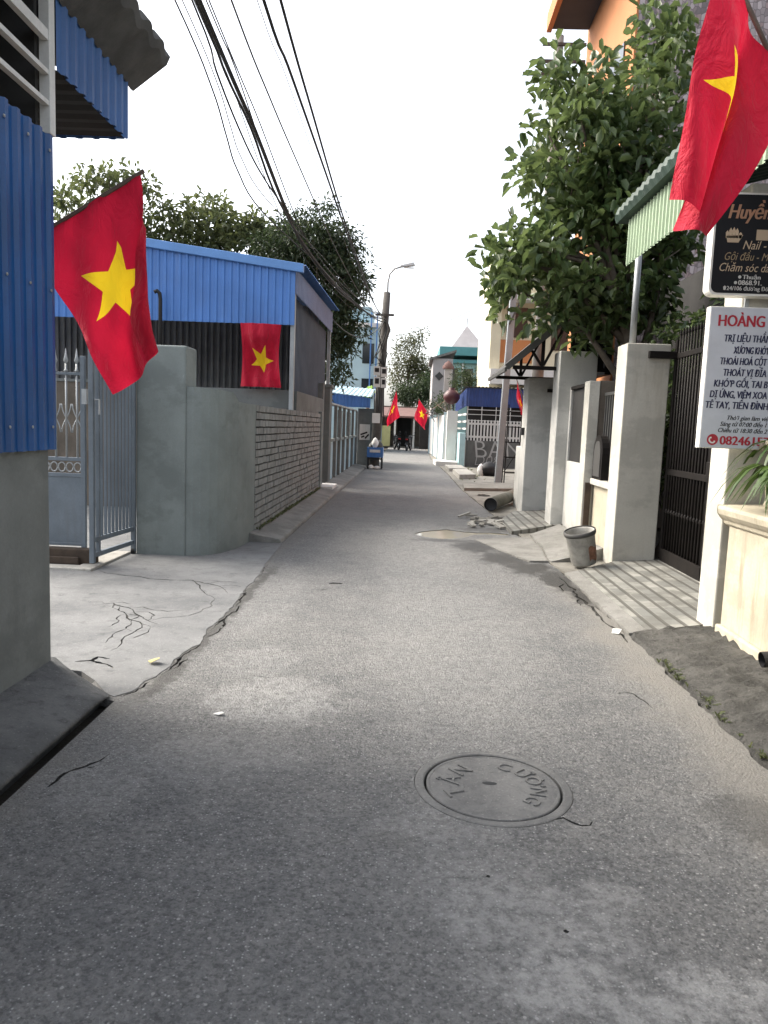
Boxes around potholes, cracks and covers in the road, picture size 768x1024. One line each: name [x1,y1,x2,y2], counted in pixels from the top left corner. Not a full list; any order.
crack [559,577,628,642]
crack [104,565,268,696]
manhole cover [414,752,573,828]
crack [79,602,211,667]
crack [48,754,109,787]
